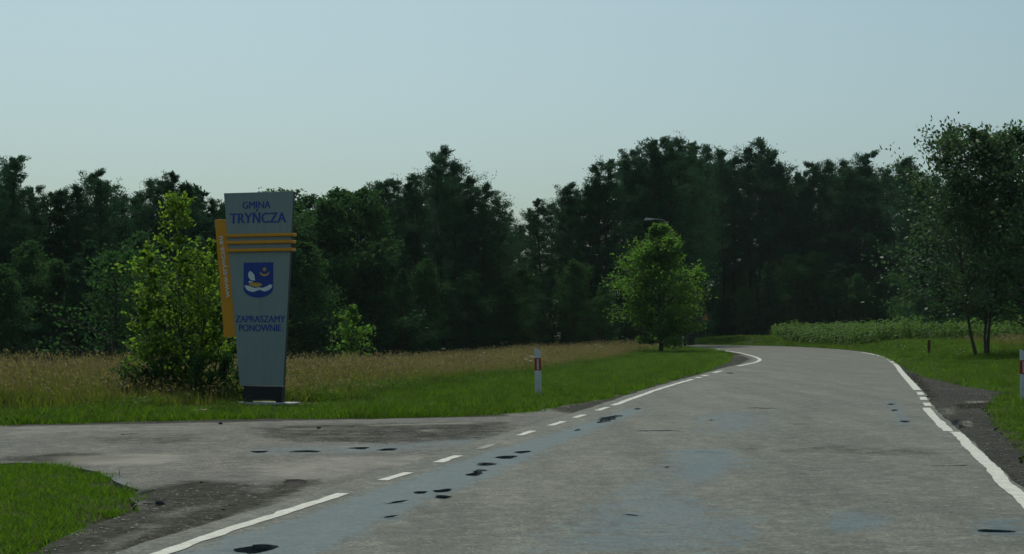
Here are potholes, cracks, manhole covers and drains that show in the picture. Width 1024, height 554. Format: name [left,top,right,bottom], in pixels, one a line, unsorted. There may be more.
pothole [234,544,279,554]
